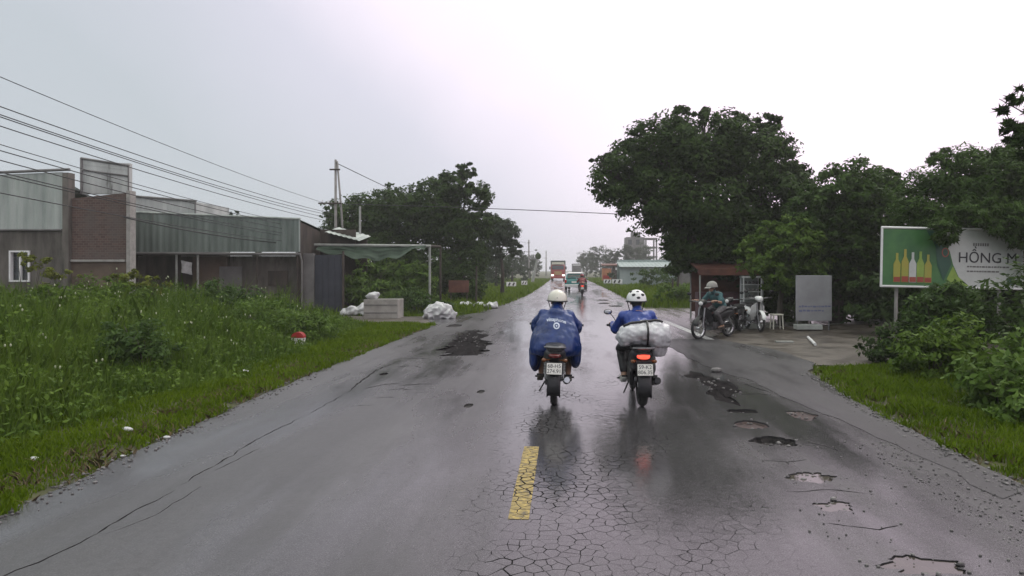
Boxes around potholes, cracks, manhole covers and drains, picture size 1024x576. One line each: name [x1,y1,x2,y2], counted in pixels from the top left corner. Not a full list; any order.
pothole [865,554,966,576]
crack [445,342,818,576]
pothole [733,419,770,429]
crack [4,358,426,576]
pothole [786,411,819,421]
pothole [812,497,853,512]
pothole [748,436,802,447]
pothole [785,472,837,484]
pothole [679,371,742,406]
pothole [436,330,493,358]
